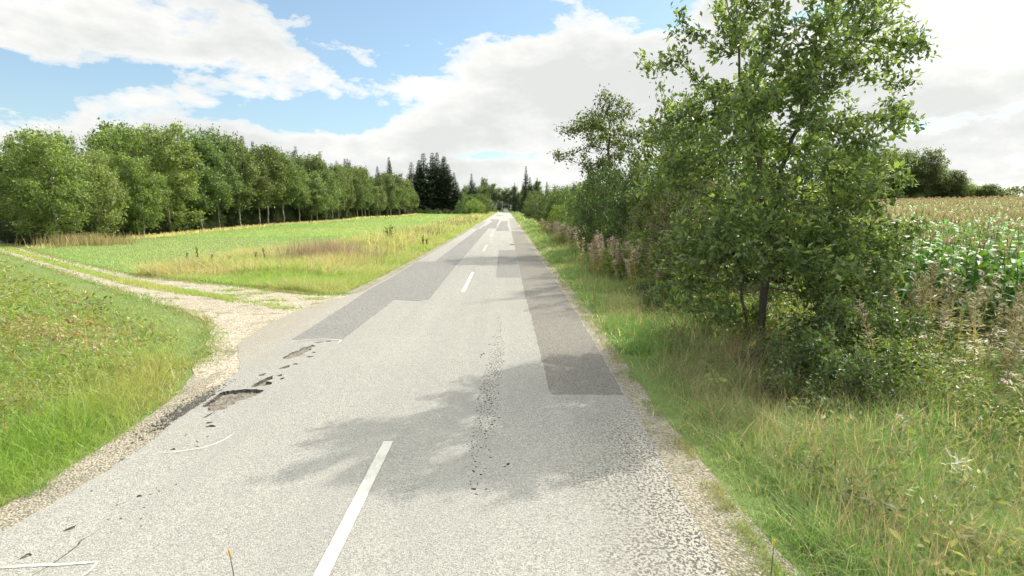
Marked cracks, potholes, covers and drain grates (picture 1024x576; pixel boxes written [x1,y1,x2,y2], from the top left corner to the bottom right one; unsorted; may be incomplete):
pothole [251,375,274,387]
pothole [203,389,264,412]
crack [33,484,177,575]
crack [463,322,505,495]
pothole [283,345,315,359]
